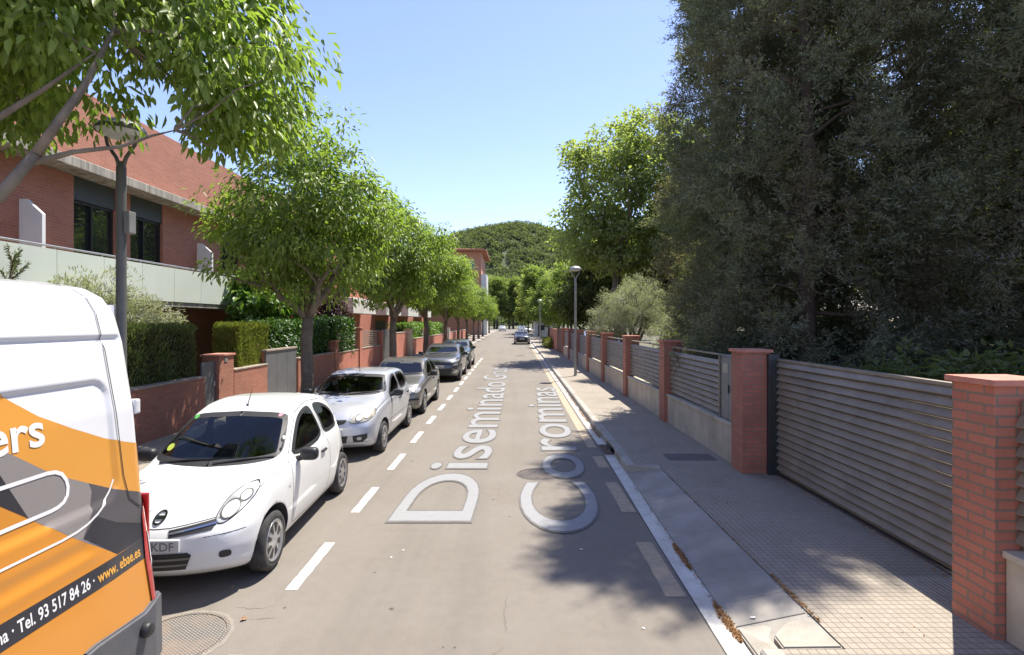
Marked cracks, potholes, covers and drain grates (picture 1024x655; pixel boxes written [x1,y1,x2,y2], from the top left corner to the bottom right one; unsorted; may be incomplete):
drain grate [598,438,622,455]
manhole cover [160,610,235,655]
